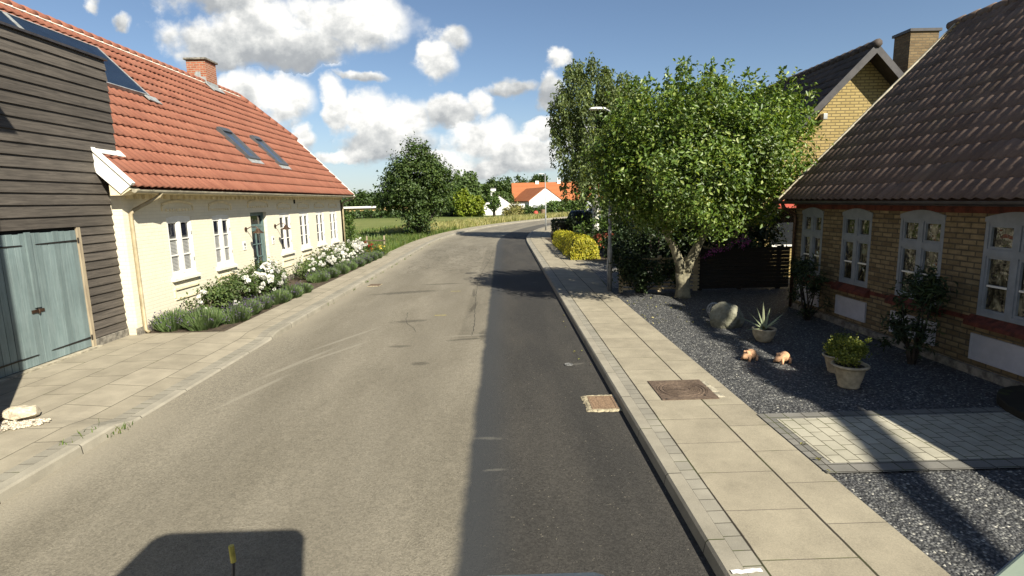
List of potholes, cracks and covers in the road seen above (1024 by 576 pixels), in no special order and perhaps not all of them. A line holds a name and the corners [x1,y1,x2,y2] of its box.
manhole cover [647,379,725,401]
